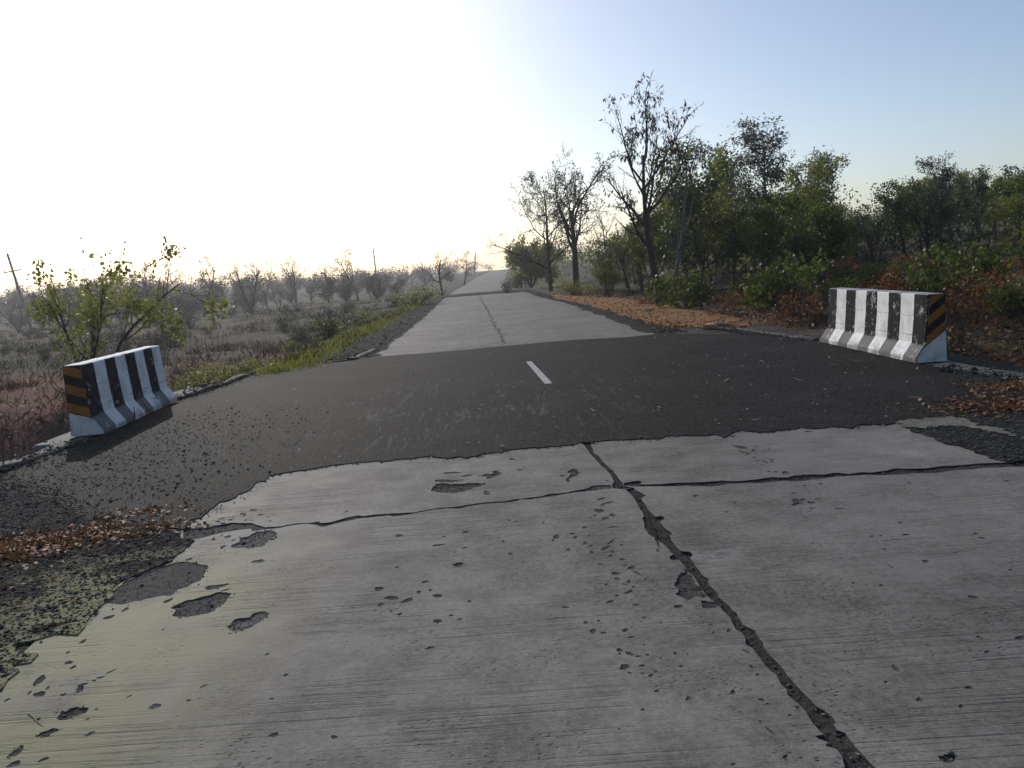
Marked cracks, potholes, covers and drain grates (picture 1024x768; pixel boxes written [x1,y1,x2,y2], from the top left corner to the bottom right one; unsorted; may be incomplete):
pothole [431,483,483,493]
pothole [171,592,231,618]
pothole [108,562,209,605]
crack [183,444,1024,768]
pothole [674,571,707,600]
pothole [231,530,277,548]
pothole [227,611,268,632]
